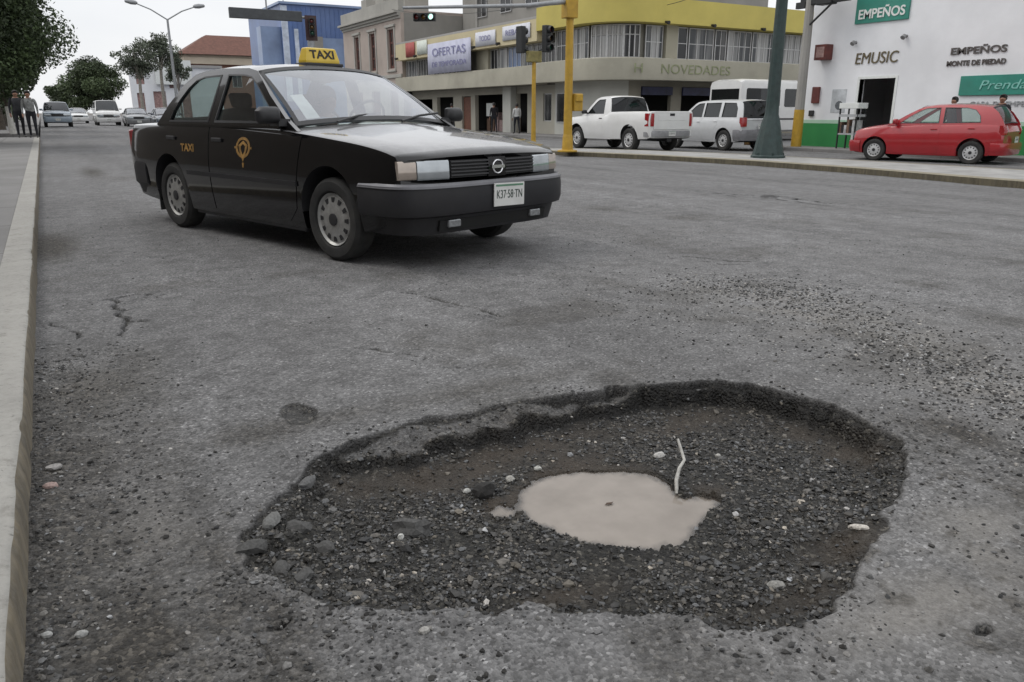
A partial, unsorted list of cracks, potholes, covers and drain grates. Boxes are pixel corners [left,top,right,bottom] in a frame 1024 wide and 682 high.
crack [33,288,168,416]
crack [696,191,856,207]
crack [390,287,525,325]
pothole [210,376,927,656]
